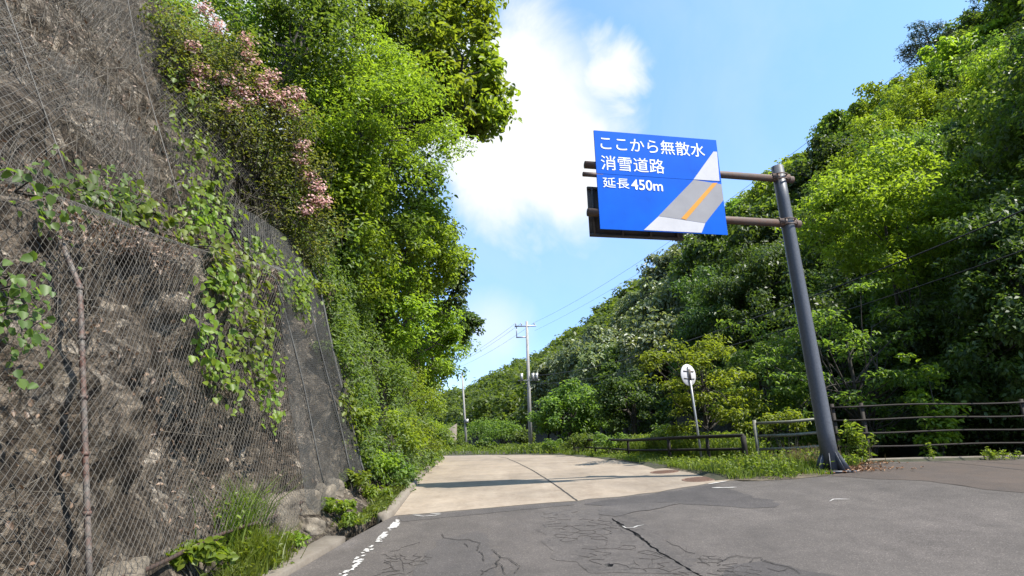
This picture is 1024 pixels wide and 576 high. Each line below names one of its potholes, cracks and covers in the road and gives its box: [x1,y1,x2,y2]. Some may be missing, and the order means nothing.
crack [375,542,432,576]
crack [442,534,520,574]
crack [548,511,800,576]
